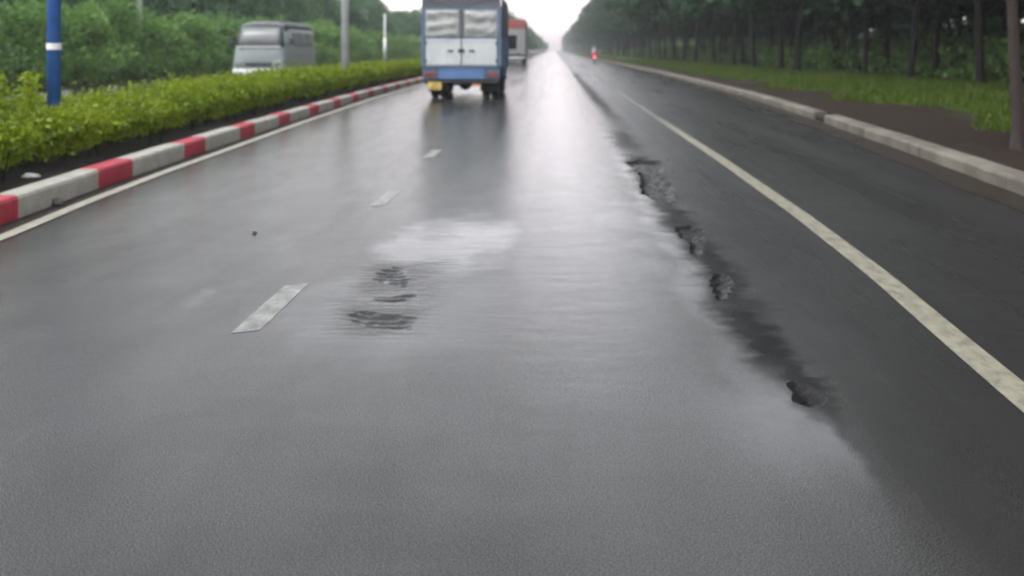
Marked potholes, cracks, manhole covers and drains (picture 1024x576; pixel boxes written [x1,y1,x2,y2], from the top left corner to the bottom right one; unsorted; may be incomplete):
pothole [786,381,829,409]
pothole [623,160,677,204]
pothole [368,294,419,303]
pothole [370,267,413,289]
pothole [674,225,707,257]
pothole [346,311,420,330]
pothole [709,271,735,302]
